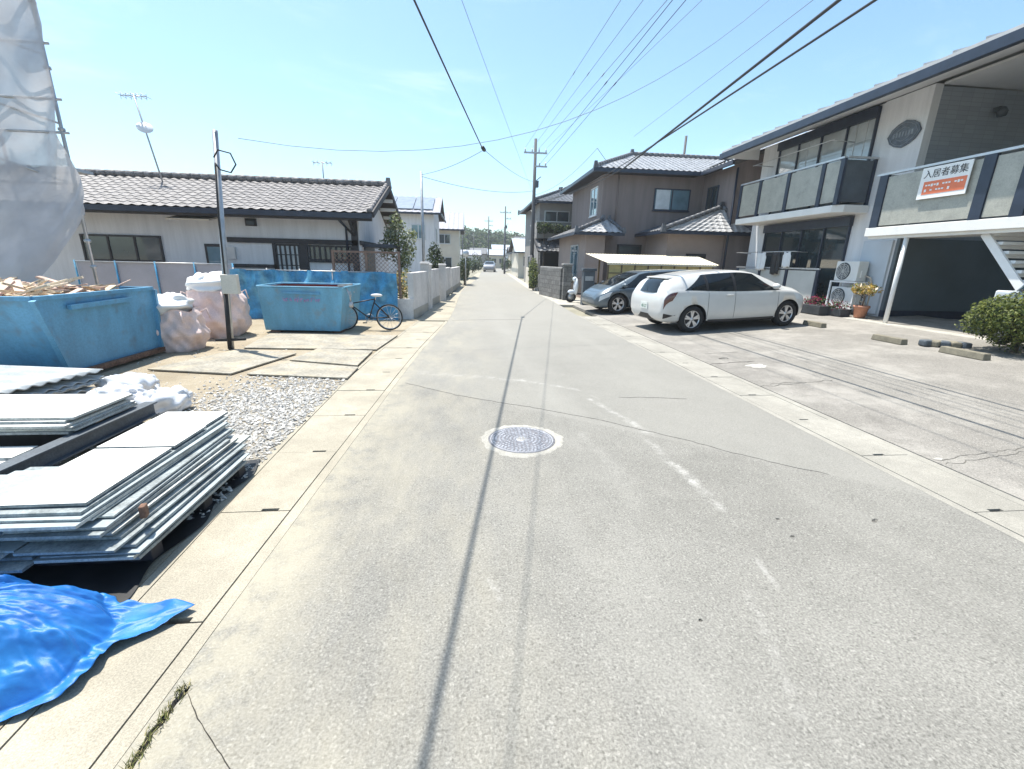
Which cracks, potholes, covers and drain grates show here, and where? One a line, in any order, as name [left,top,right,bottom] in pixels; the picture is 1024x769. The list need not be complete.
crack [129,688,230,769]
crack [941,447,1024,464]
manhole cover [481,425,564,458]
